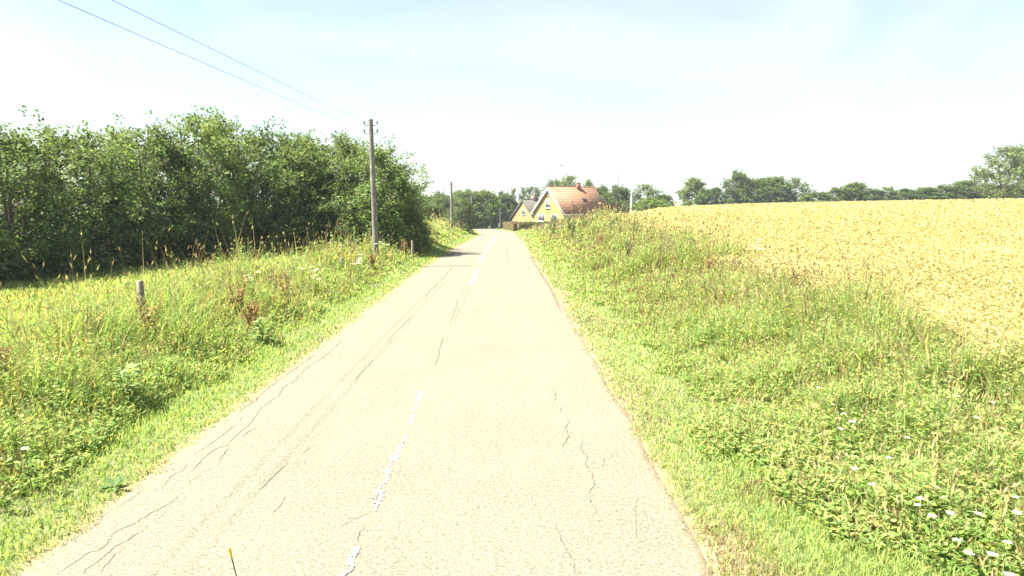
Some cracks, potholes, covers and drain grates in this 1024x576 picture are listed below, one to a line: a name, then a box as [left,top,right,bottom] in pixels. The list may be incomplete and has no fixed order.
crack [553,389,605,513]
crack [30,341,342,574]
